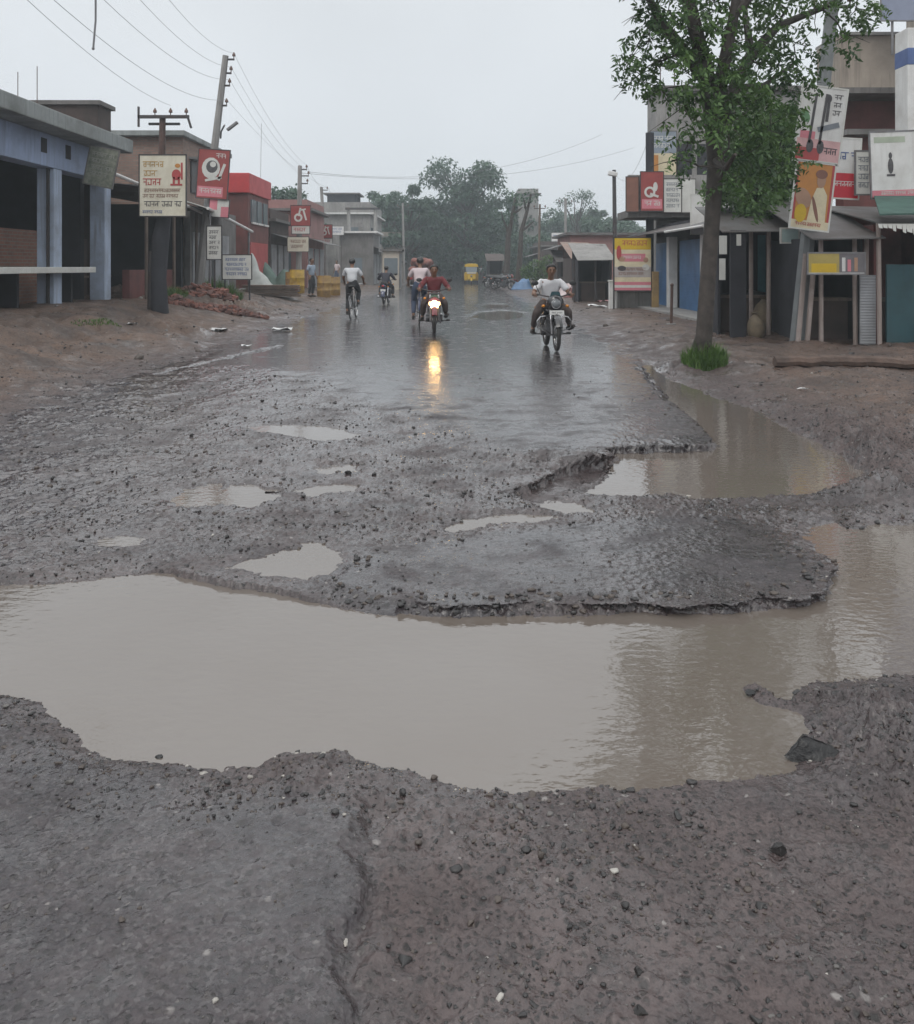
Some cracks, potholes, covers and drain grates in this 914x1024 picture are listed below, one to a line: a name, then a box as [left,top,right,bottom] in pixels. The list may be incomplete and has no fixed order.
pothole [0,509,914,828]
pothole [267,476,375,500]
pothole [579,360,883,500]
pothole [527,494,608,515]
pothole [145,475,296,513]
pothole [230,420,373,443]
pothole [504,453,615,504]
